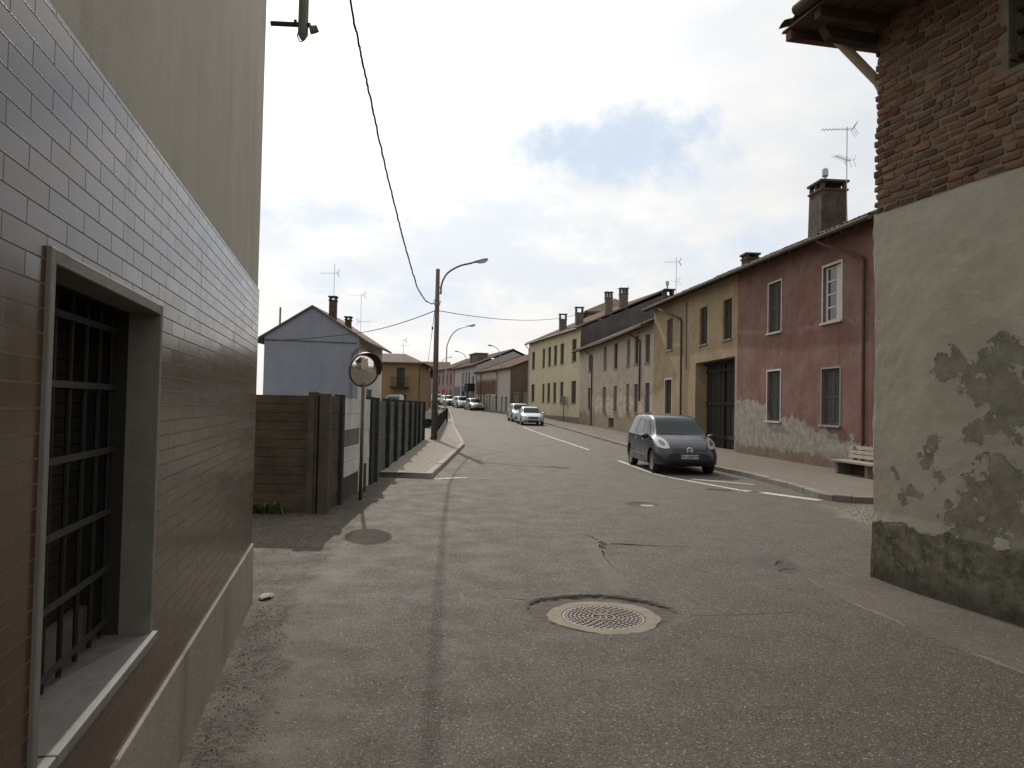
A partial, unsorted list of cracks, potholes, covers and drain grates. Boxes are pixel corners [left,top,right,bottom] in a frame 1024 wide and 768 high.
pothole [775,560,797,575]
crack [571,534,682,577]
manhole cover [545,601,662,634]
